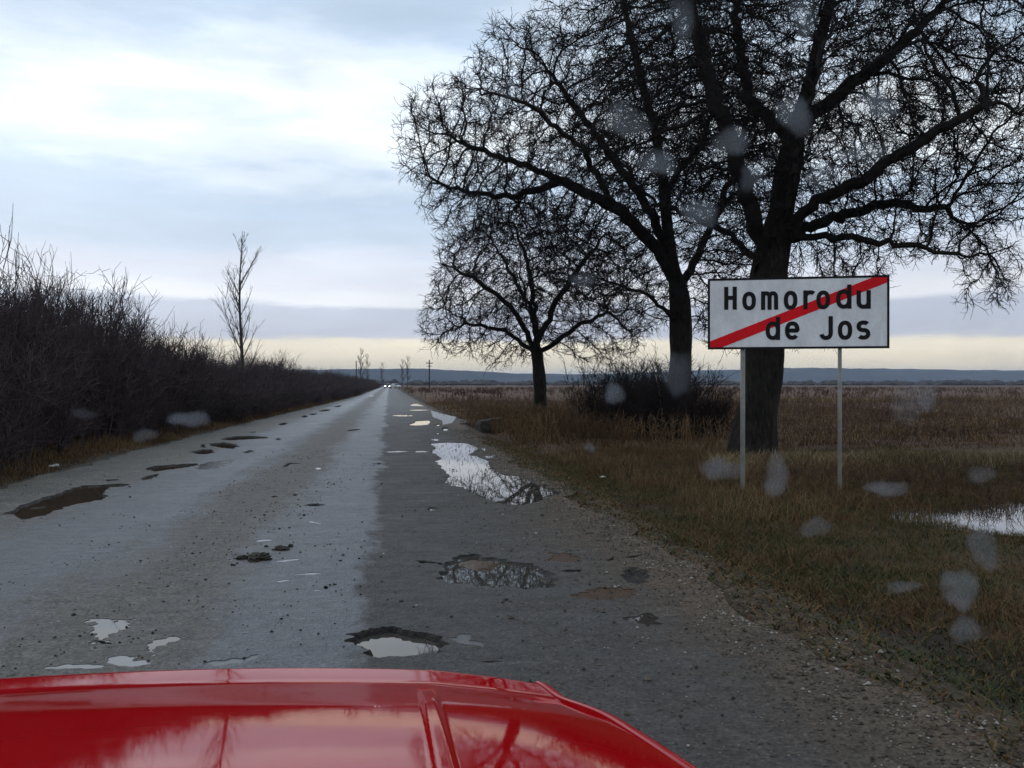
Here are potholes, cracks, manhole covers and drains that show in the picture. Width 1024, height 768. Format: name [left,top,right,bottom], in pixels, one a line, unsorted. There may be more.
pothole [4,483,130,520]
pothole [344,626,450,658]
pothole [430,442,561,505]
pothole [623,613,663,626]
pothole [436,553,560,589]
pothole [145,463,198,471]
